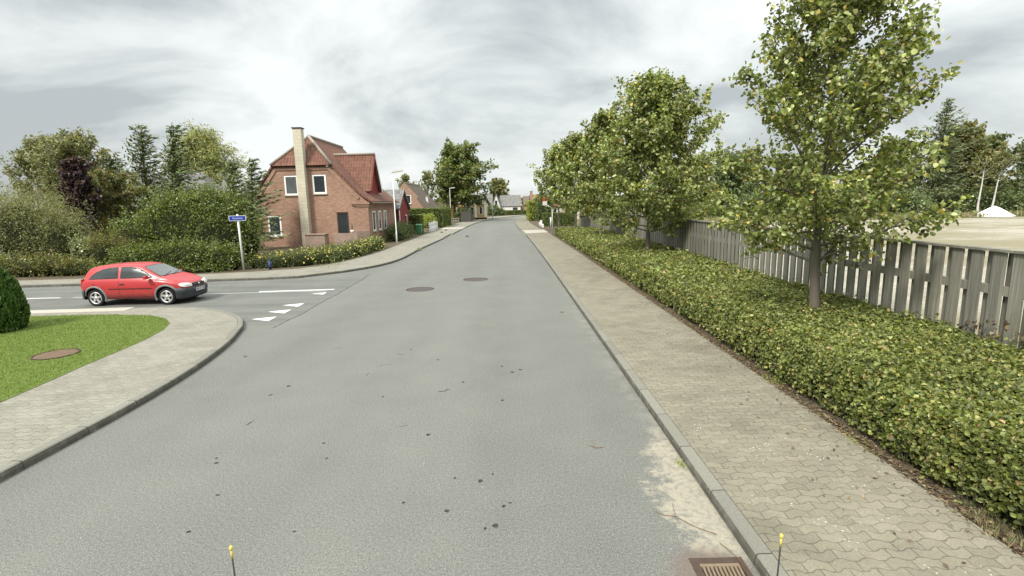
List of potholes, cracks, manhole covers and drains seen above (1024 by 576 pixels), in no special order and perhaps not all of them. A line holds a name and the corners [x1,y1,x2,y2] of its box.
manhole cover [30,348,81,360]
drain grate [688,557,753,576]
